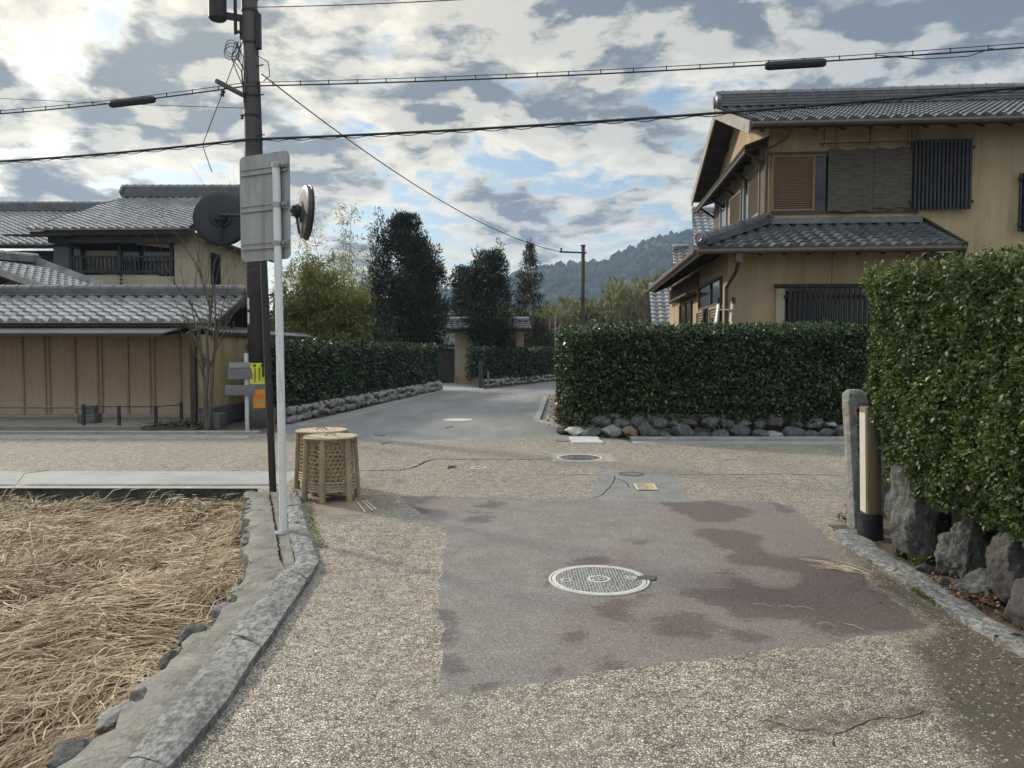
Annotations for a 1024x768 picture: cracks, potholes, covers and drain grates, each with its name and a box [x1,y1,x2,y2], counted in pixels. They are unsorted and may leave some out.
crack [361,458,630,498]
manhole cover [550,454,618,462]
crack [759,711,930,750]
manhole cover [549,565,657,596]
